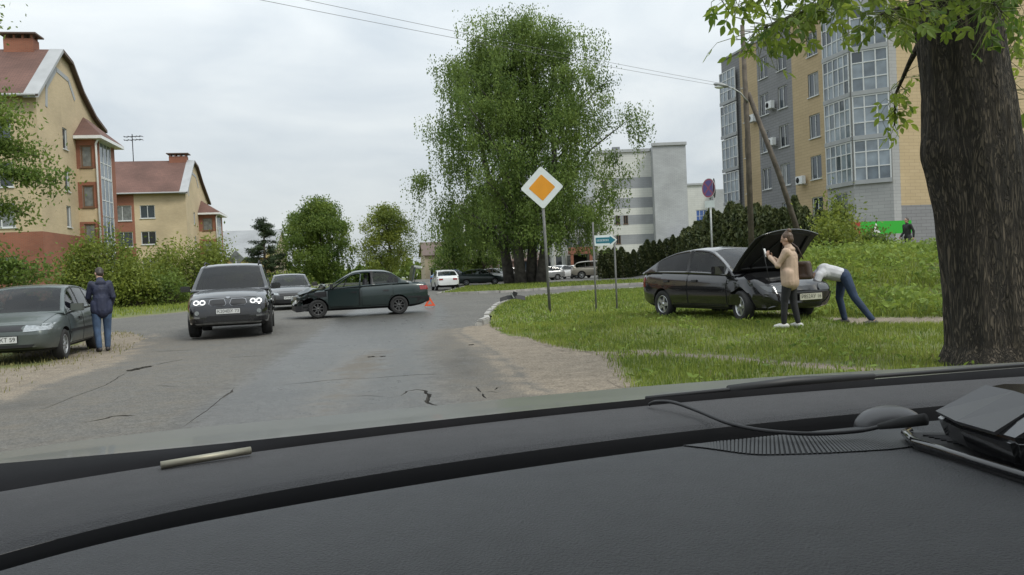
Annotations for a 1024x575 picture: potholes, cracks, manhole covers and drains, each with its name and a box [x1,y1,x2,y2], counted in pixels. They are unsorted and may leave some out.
crack [307,374,434,405]
